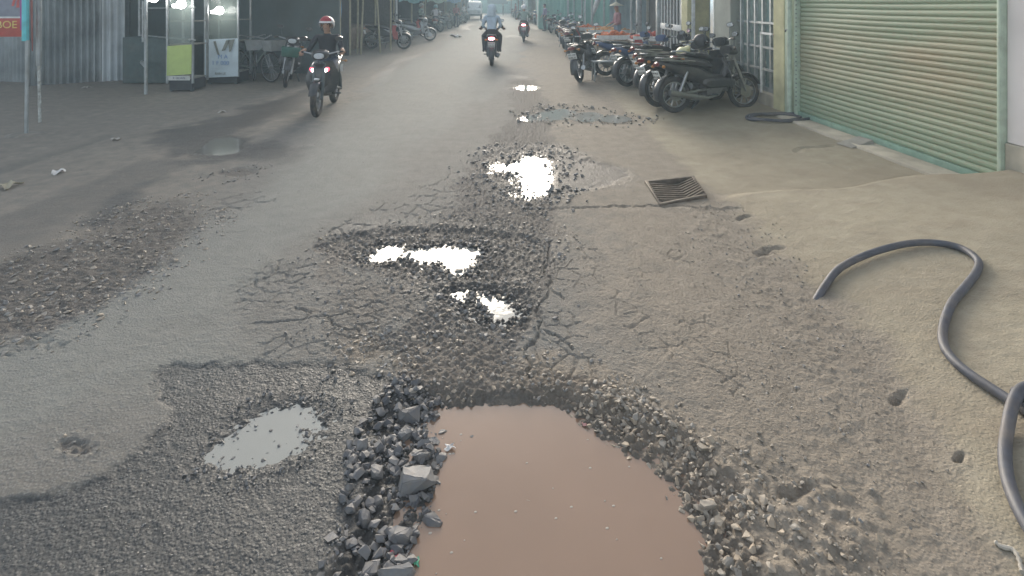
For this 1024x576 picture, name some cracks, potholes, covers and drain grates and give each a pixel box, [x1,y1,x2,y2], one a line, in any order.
pothole [948,449,969,465]
pothole [308,223,560,286]
drain grate [644,175,707,206]
pothole [422,279,547,337]
pothole [512,84,542,92]
pothole [51,433,101,458]
pothole [308,378,785,576]
pothole [510,104,655,129]
crack [229,258,419,365]
crack [316,171,463,241]
pothole [462,144,638,206]
